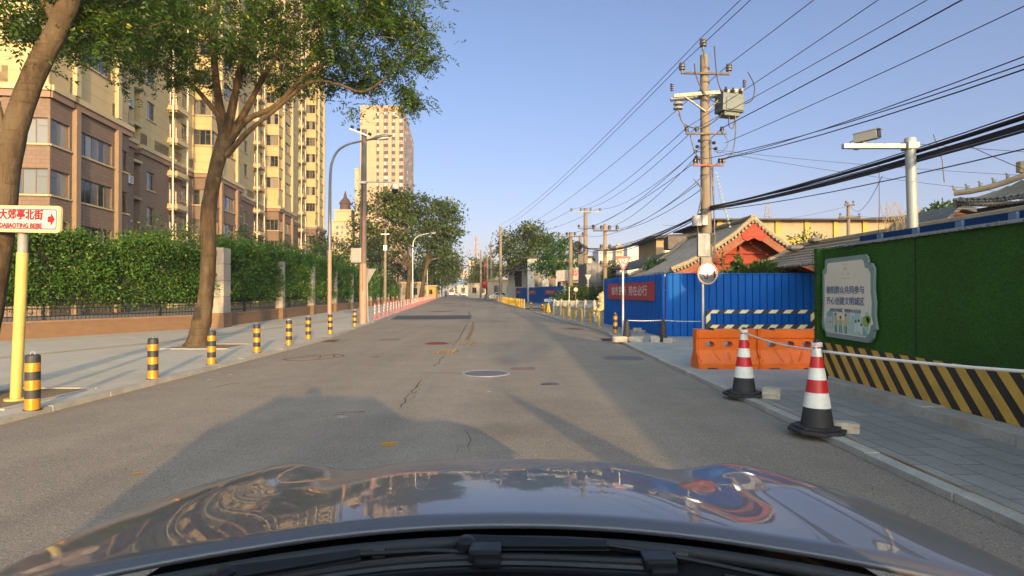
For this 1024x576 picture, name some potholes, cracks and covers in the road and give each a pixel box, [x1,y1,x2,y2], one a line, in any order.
crack [399,327,465,409]
